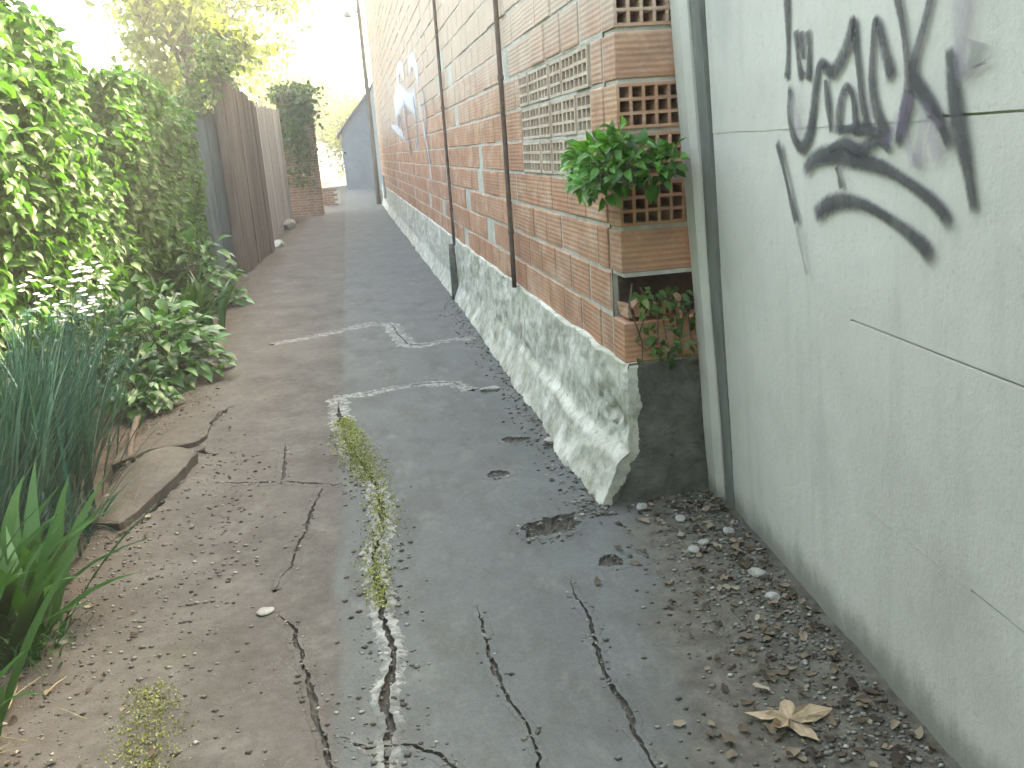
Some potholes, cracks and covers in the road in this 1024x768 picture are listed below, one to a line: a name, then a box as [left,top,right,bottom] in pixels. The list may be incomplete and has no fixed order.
crack [272,380,659,768]
pothole [495,435,538,447]
pothole [512,512,591,541]
pothole [478,468,518,481]
pothole [588,551,633,573]
